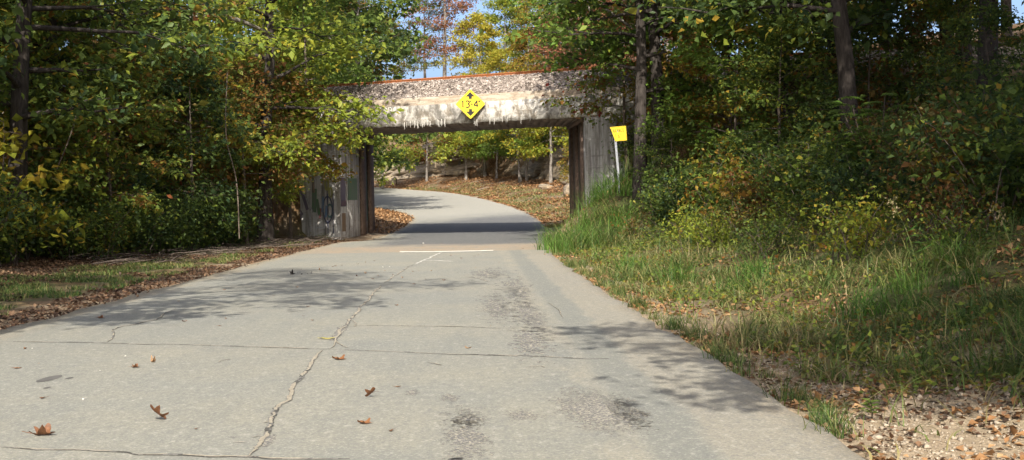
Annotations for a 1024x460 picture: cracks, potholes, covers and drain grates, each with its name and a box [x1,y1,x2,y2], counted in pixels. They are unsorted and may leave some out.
crack [0,265,494,459]
